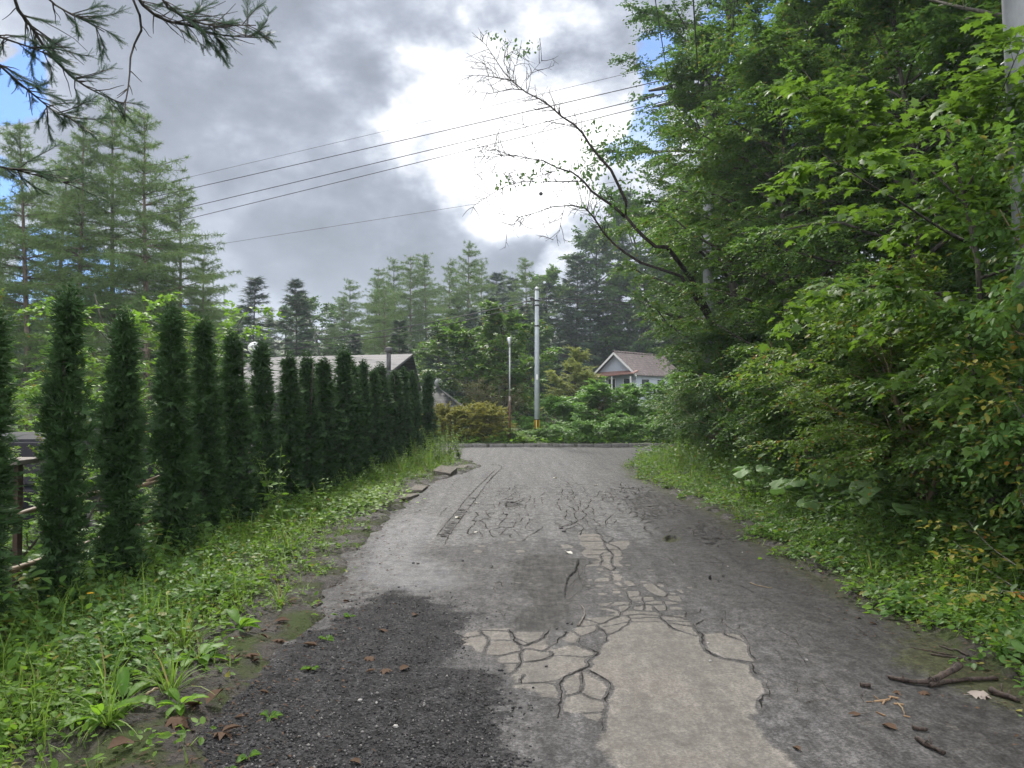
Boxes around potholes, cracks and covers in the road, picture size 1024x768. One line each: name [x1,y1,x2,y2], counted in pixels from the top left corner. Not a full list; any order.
crack [467,481,916,731]
crack [437,464,562,544]
